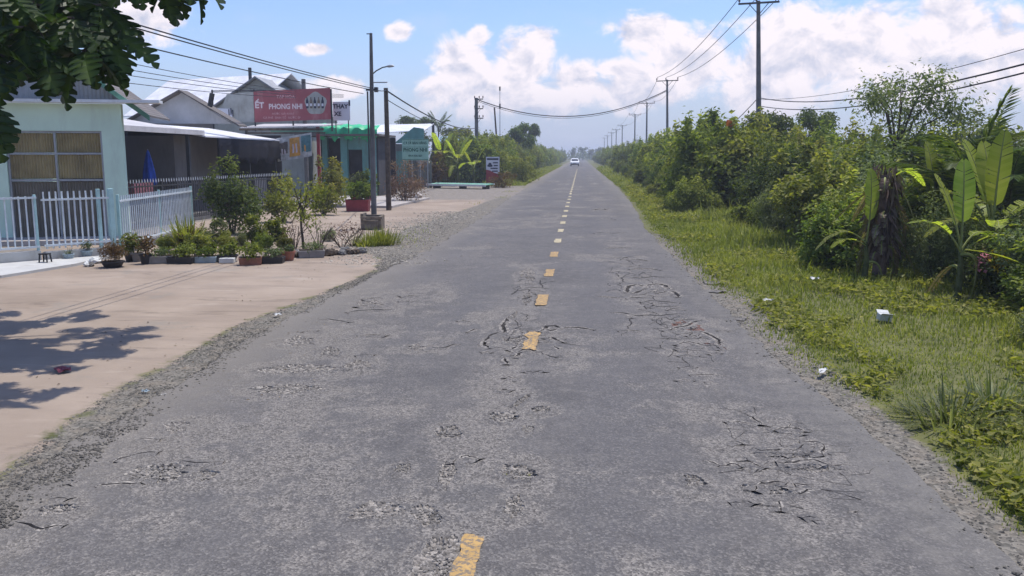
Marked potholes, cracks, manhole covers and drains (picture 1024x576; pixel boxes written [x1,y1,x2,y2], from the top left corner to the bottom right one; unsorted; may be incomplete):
crack [5,437,224,534]
crack [429,208,746,394]
pothole [430,459,468,491]
pothole [488,463,546,485]
pothole [338,498,419,523]
pothole [116,461,203,488]
crack [703,407,876,526]
pothole [481,410,530,426]
pothole [395,532,464,576]
pothole [427,424,471,442]
pothole [676,472,715,491]
